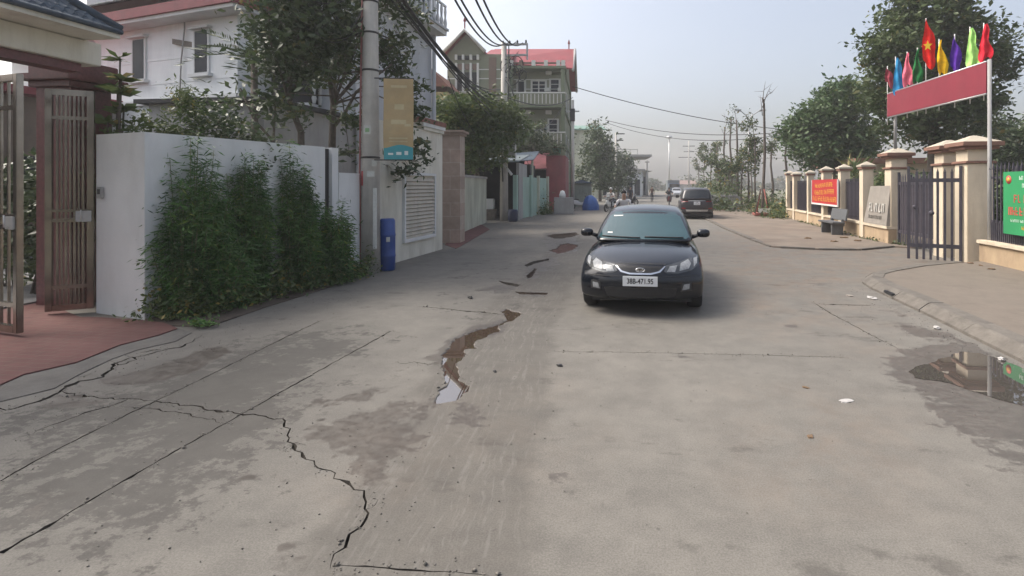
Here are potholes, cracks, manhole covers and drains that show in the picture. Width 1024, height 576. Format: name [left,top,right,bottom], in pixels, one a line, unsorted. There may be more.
pothole [549,243,578,254]
crack [0,338,377,567]
pothole [434,308,523,404]
